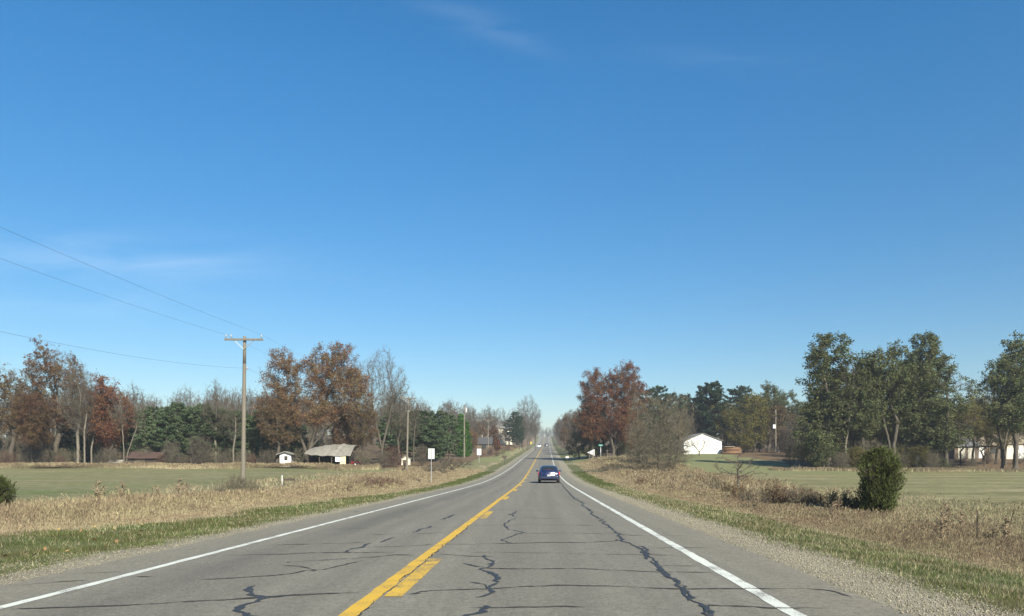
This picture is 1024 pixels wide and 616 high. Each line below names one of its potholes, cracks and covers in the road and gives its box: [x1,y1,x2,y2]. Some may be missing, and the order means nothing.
crack [410,533,852,608]
crack [199,528,442,580]
